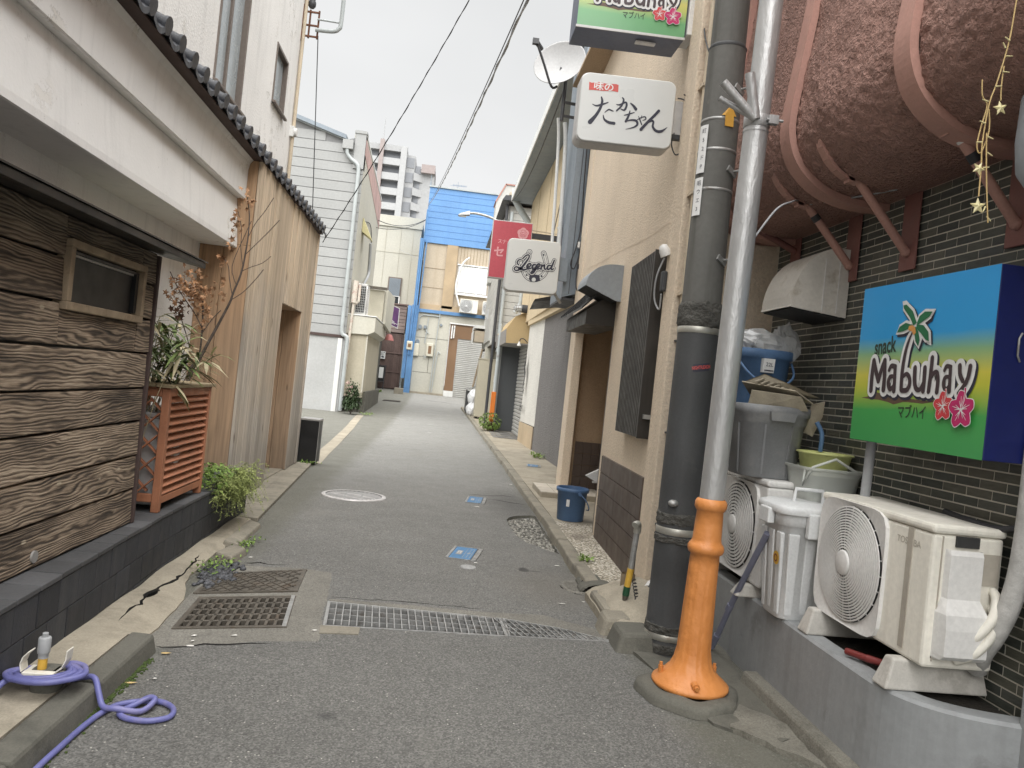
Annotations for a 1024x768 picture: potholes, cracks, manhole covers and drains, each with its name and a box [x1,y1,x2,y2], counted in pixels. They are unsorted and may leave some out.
pothole [507,515,559,554]
drain grate [171,595,296,629]
drain grate [493,618,609,642]
utility cover [465,496,487,504]
utility cover [445,546,483,562]
drain grate [323,601,508,637]
crack [119,556,203,620]
manhole cover [193,569,307,594]
manhole cover [321,490,386,502]
